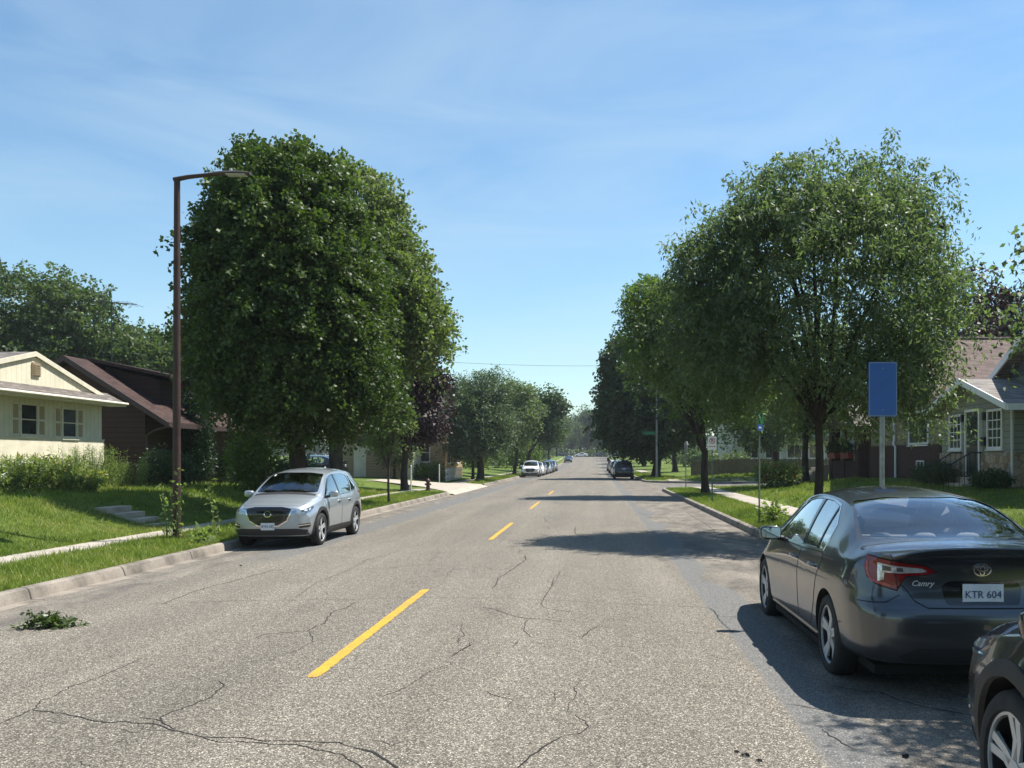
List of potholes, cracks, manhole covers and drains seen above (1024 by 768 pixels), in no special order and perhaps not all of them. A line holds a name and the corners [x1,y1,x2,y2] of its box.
crack [517,678,589,768]
crack [0,658,407,768]
crack [157,518,708,654]
